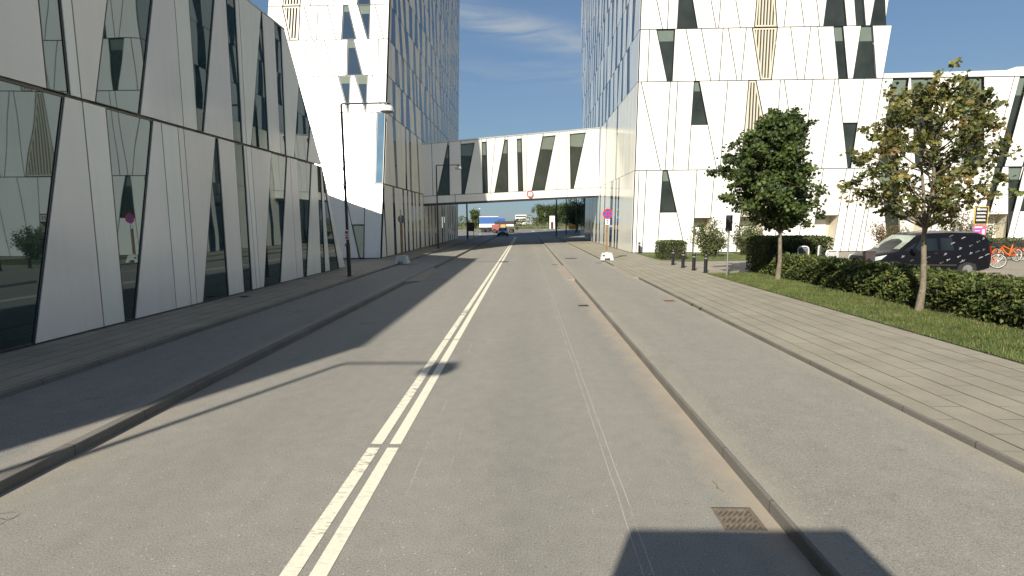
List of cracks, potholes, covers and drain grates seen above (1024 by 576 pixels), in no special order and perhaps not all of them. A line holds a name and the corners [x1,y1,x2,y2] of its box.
drain grate [711,508,768,531]
